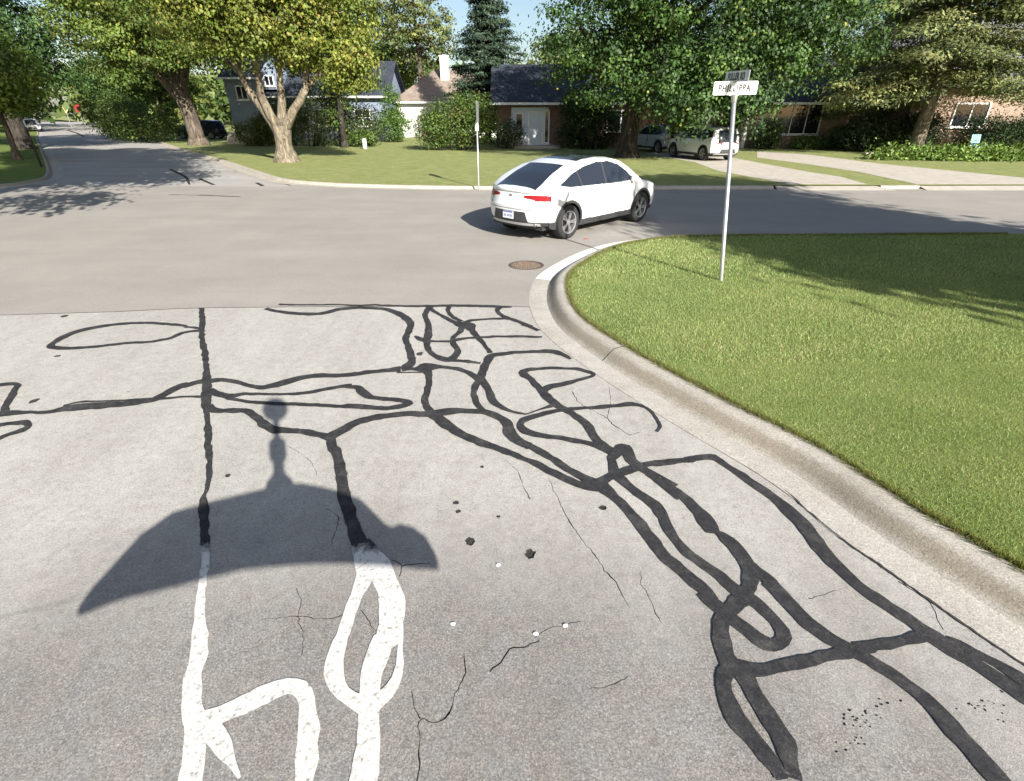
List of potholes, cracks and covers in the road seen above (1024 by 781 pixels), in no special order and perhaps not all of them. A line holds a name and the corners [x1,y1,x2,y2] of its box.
manhole cover [508,260,544,270]
crack [490,621,581,672]
crack [549,480,661,622]
crack [232,588,343,656]
crack [411,657,466,781]
crack [572,389,639,435]
